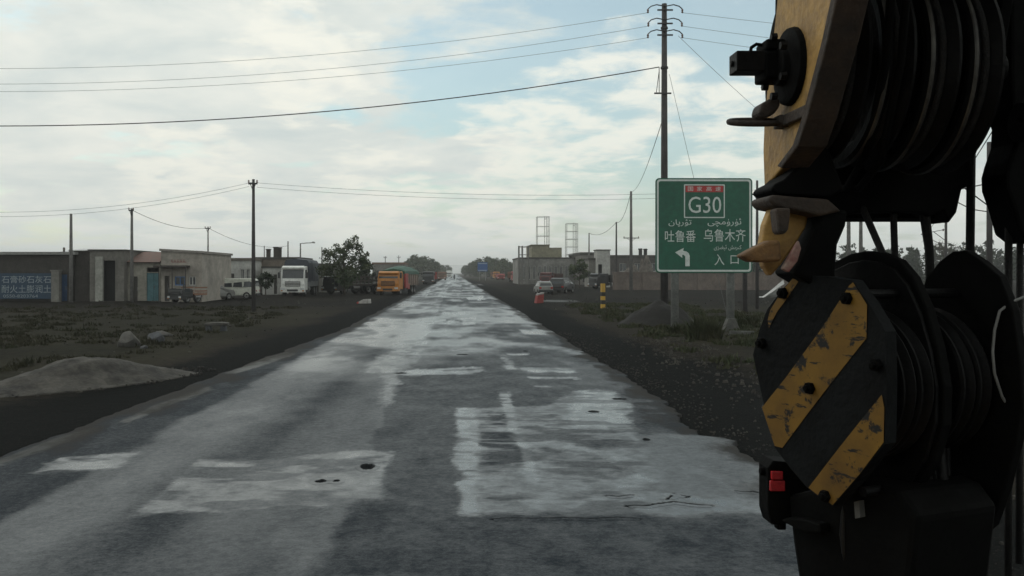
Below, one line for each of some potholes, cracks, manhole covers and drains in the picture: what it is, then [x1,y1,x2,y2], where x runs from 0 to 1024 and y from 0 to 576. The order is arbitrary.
crack [607,492,712,508]
pothole [356,462,380,472]
